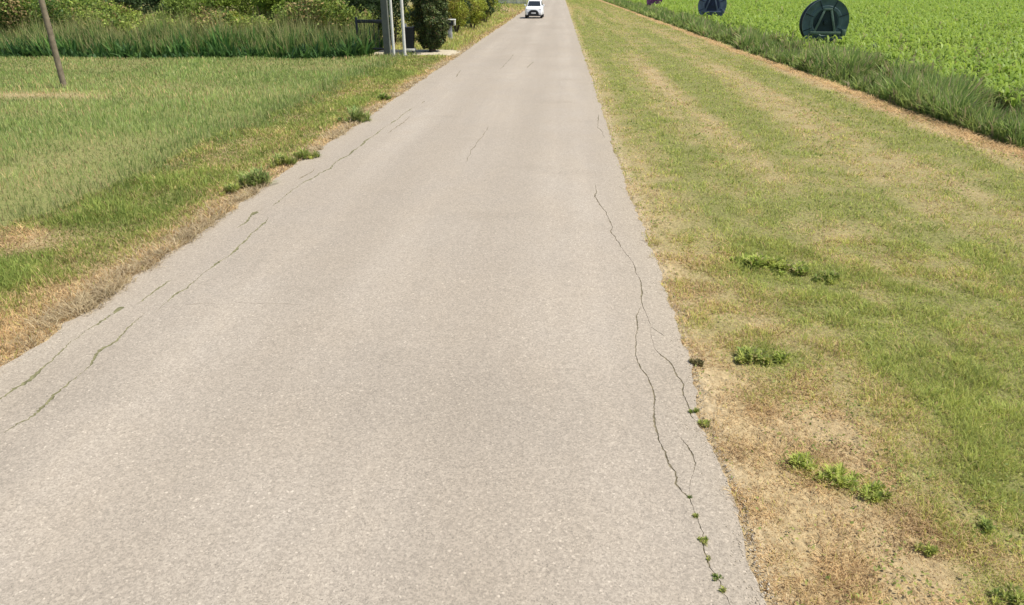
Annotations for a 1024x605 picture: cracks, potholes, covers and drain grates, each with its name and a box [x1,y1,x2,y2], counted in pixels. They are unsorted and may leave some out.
crack [0,101,425,433]
crack [594,185,730,604]
